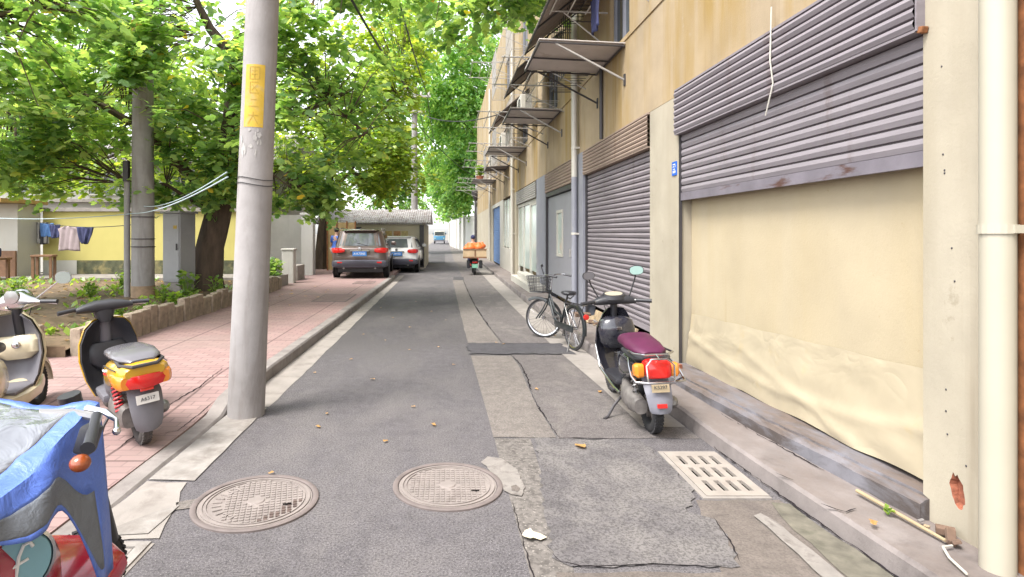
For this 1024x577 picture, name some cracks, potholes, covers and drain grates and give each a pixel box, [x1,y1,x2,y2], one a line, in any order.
manhole cover [189,475,319,534]
crack [465,284,609,439]
manhole cover [393,462,503,512]
crack [547,516,741,567]
drain grate [658,451,772,500]
